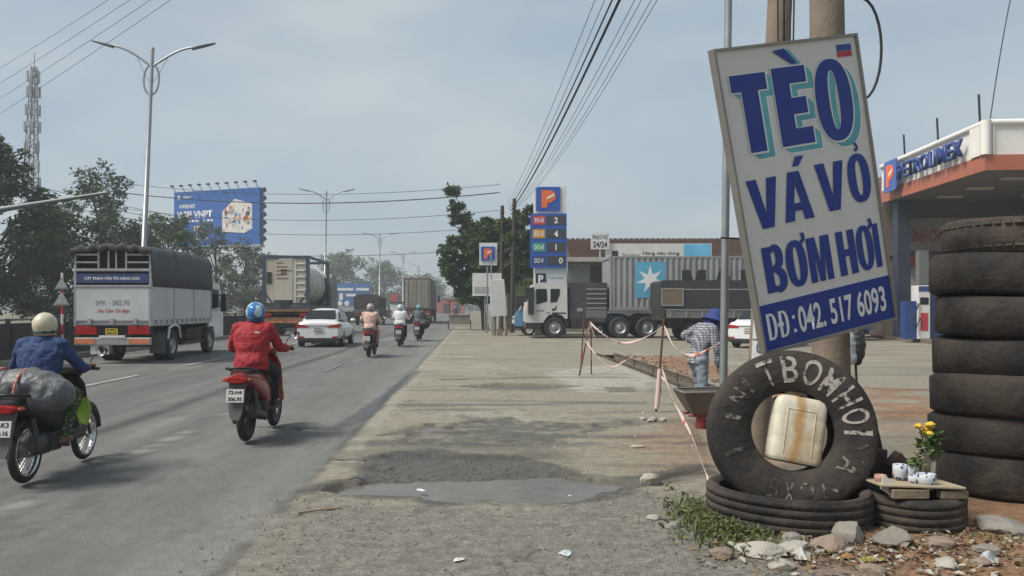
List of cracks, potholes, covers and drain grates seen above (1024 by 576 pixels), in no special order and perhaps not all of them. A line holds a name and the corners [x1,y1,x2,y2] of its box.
pothole [299,447,718,505]
